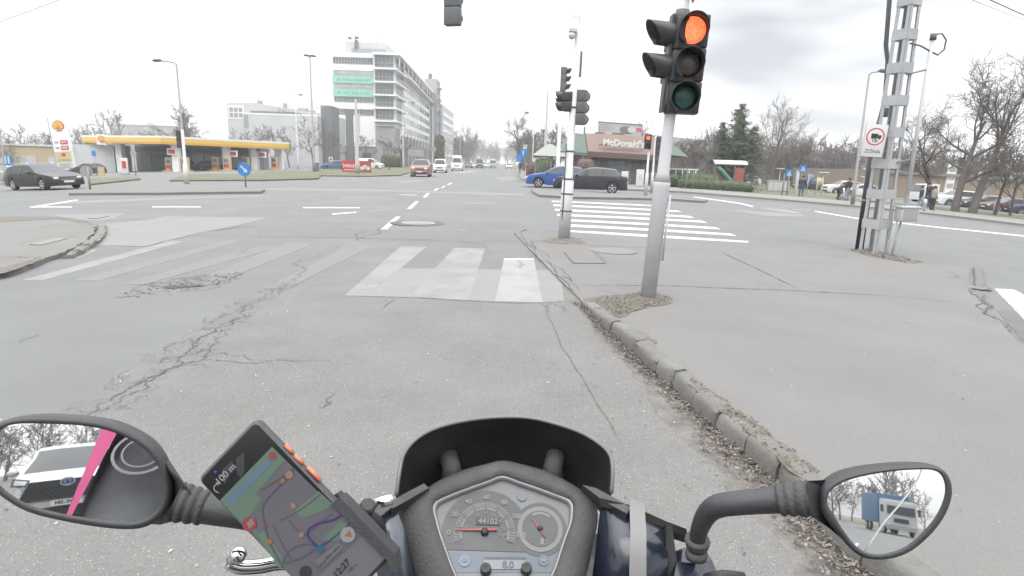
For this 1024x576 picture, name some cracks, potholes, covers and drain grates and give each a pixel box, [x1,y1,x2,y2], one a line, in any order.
crack [928,262,1023,342]
manhole cover [590,247,637,255]
crack [86,292,329,415]
pothole [121,272,241,297]
utility cover [564,252,605,263]
